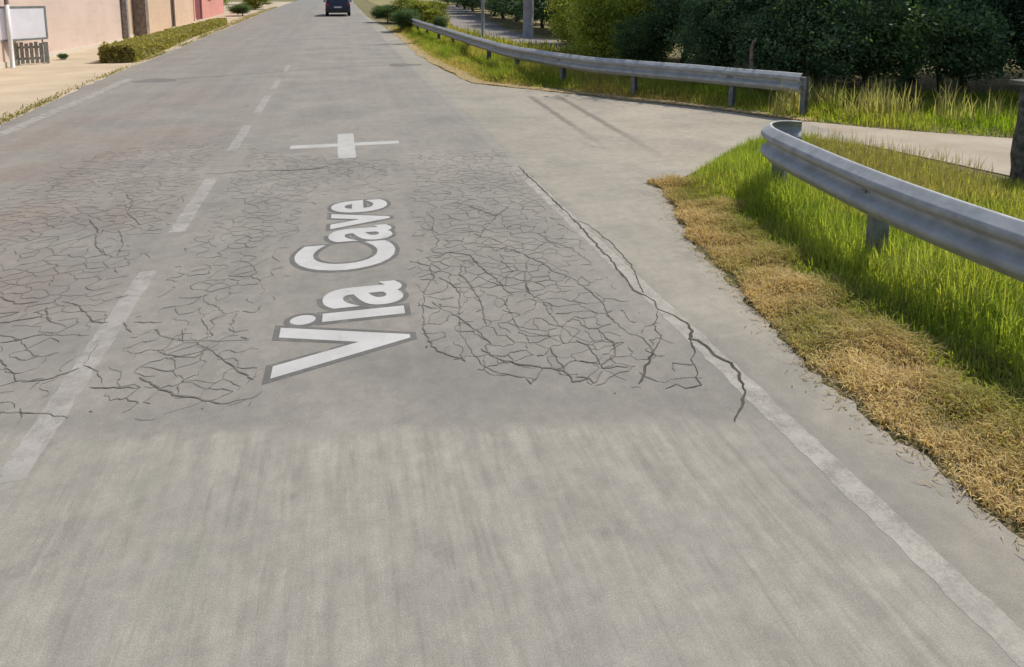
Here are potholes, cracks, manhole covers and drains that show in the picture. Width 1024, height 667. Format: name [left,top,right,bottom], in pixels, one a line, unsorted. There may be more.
crack [0,142,397,421]
crack [407,151,746,422]
